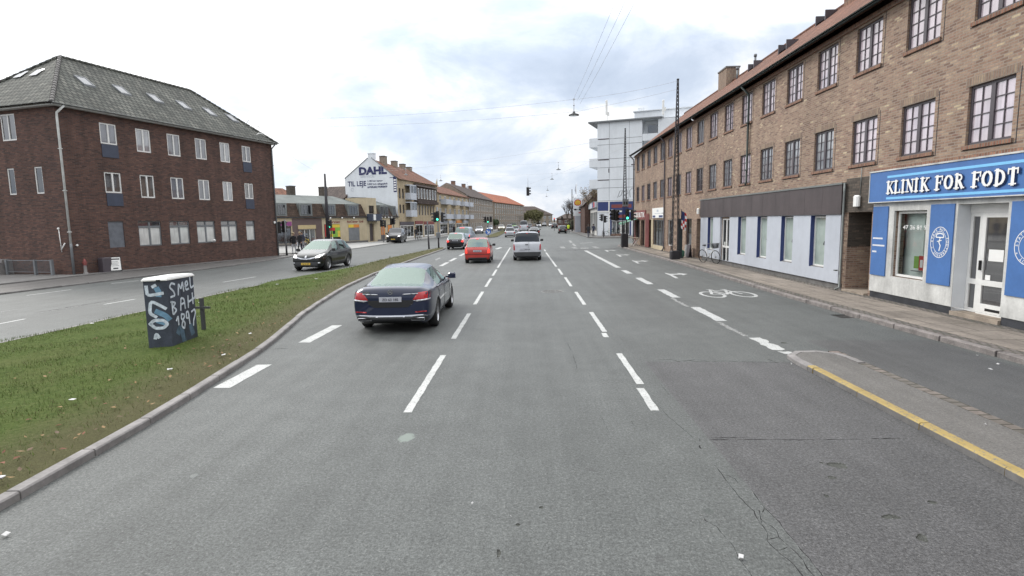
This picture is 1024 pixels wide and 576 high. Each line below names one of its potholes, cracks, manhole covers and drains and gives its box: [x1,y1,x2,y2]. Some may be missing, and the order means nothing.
crack [717,468,823,576]
